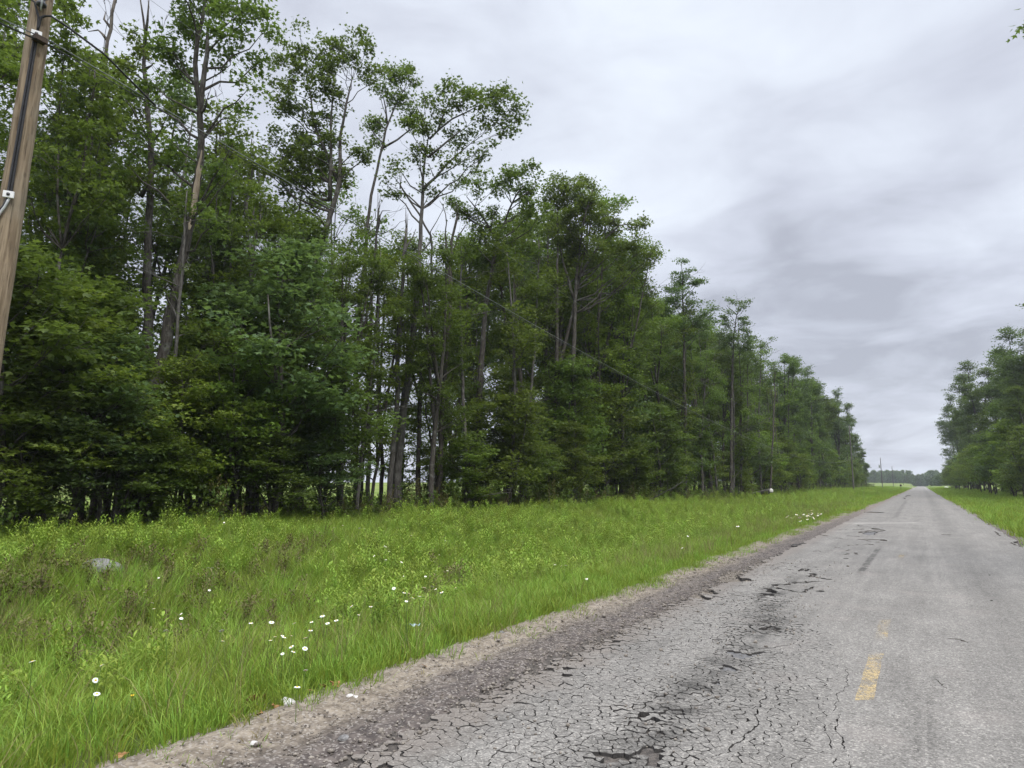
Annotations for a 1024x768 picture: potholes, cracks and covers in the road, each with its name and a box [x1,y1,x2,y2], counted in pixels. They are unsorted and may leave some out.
crack [290,555,844,768]
pothole [596,748,661,767]
